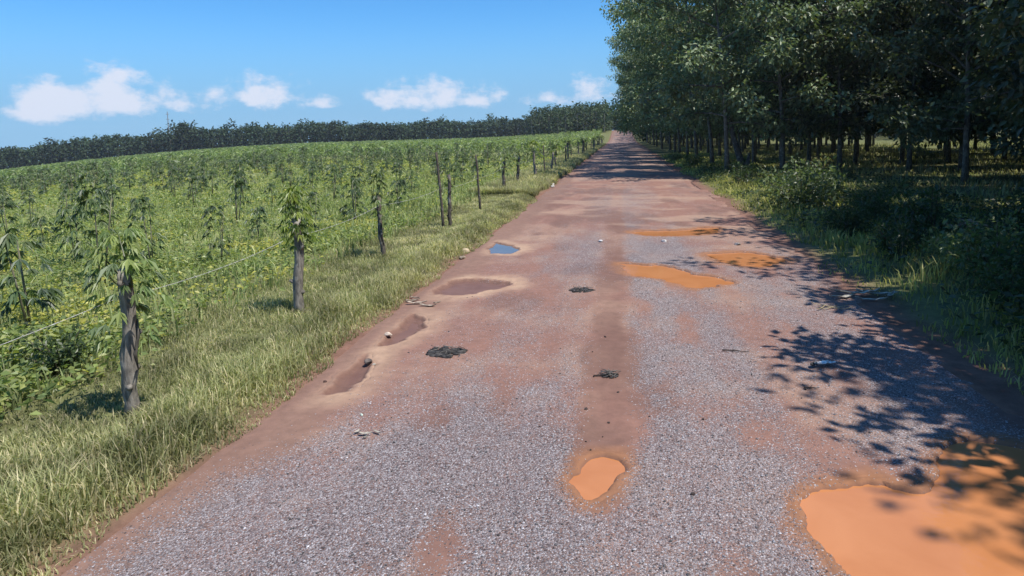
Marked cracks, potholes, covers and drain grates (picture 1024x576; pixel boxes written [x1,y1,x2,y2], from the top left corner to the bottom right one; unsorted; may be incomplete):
pothole [559,450,641,504]
pothole [429,278,517,296]
pothole [311,352,376,397]
pothole [615,262,738,289]
pothole [483,241,524,255]
pothole [702,251,792,268]
pothole [628,226,724,237]
pothole [790,433,1024,576]
pothole [374,313,430,349]
